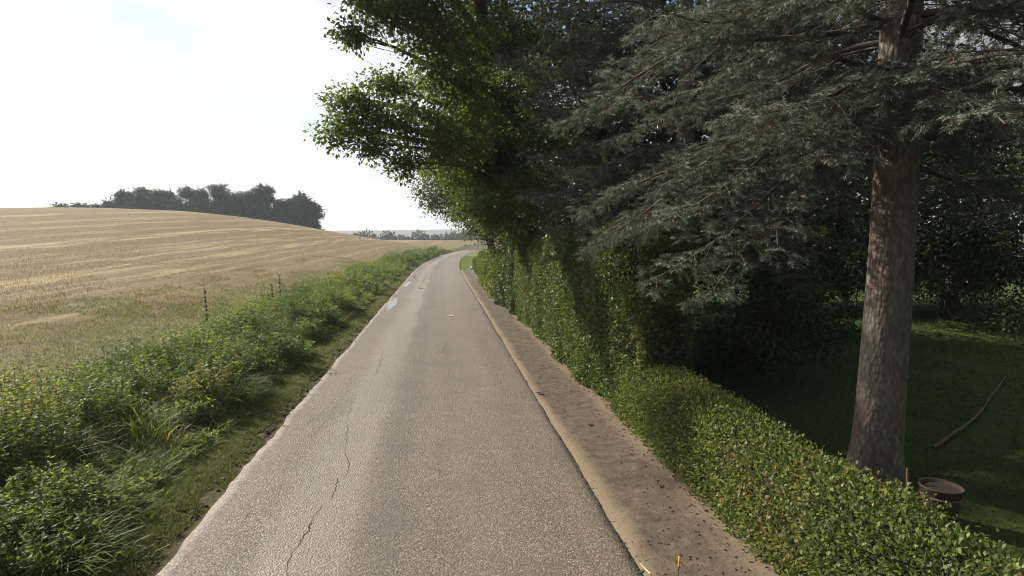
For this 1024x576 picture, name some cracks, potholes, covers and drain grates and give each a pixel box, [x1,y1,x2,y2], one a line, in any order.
crack [286,401,353,576]
